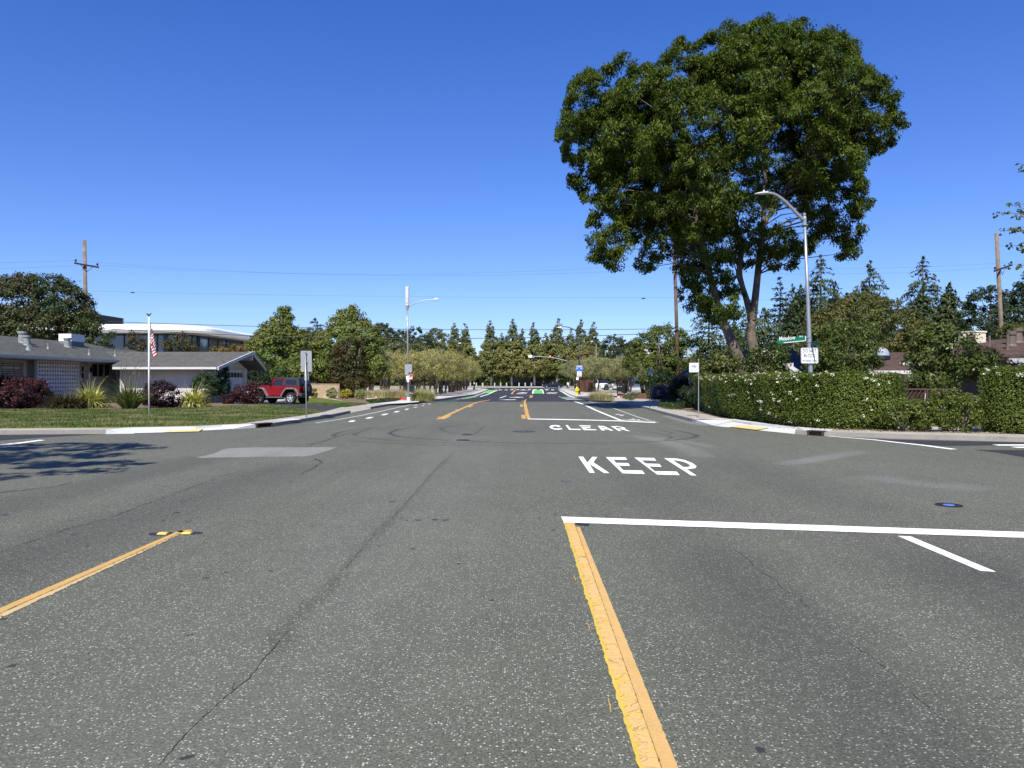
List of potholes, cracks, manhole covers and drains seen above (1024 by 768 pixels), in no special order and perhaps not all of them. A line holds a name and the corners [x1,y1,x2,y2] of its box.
crack [301,426,375,474]
crack [157,636,284,767]
